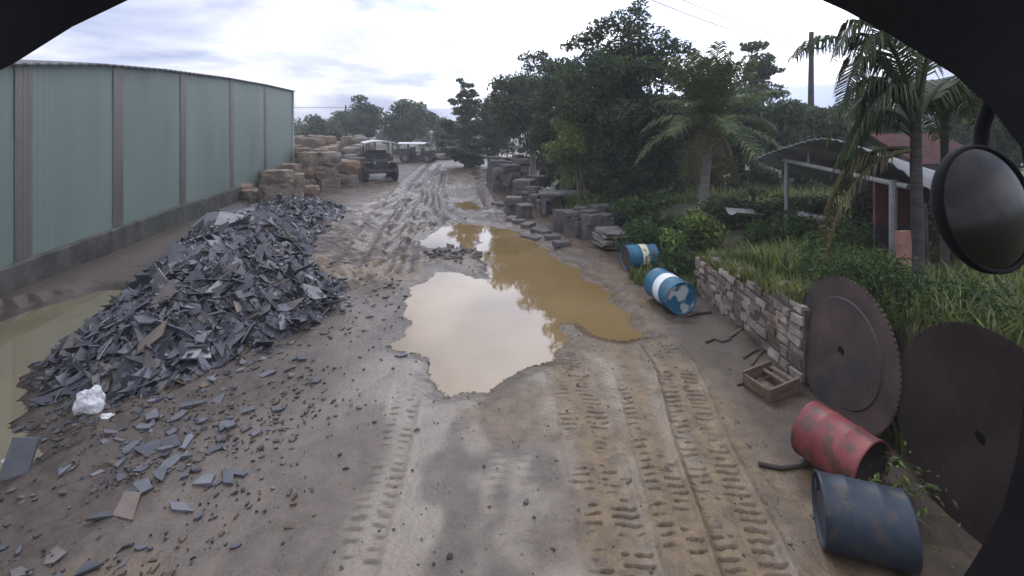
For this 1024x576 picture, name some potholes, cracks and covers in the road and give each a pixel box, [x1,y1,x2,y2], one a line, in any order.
pothole [390,226,643,398]
